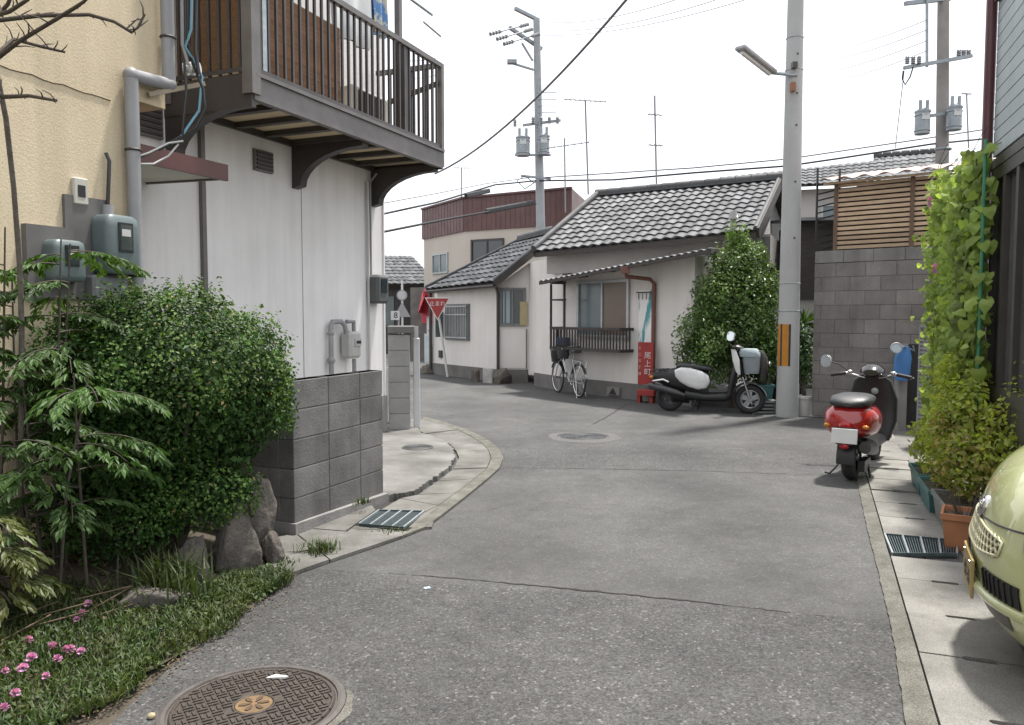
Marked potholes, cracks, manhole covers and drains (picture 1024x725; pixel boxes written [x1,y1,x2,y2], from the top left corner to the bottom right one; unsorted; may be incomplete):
drain grate [358,509,425,531]
manhole cover [155,665,346,725]
drain grate [884,533,958,559]
